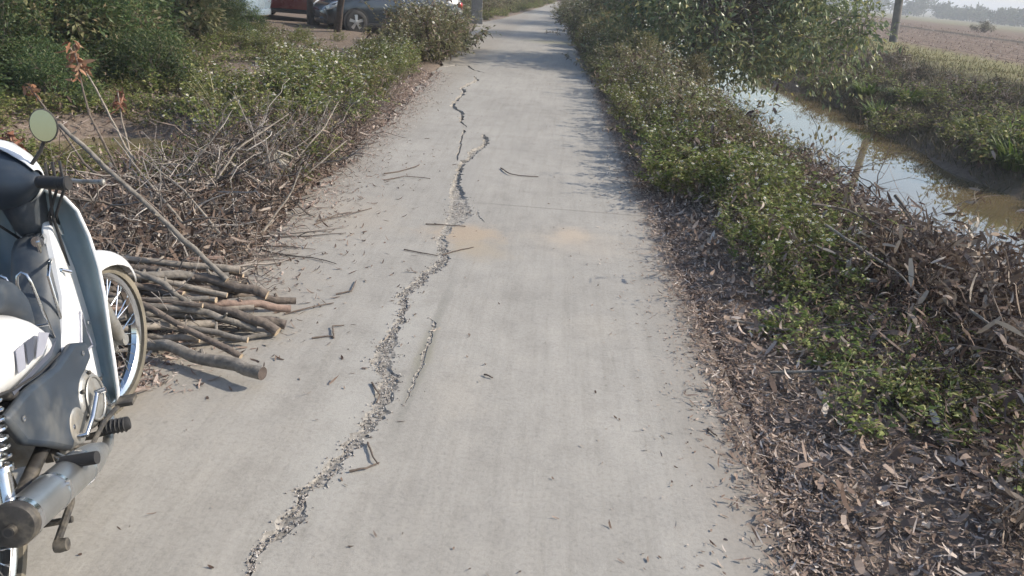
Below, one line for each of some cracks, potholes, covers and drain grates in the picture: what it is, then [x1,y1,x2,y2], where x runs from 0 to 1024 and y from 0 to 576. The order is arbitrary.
crack [242,65,490,576]
